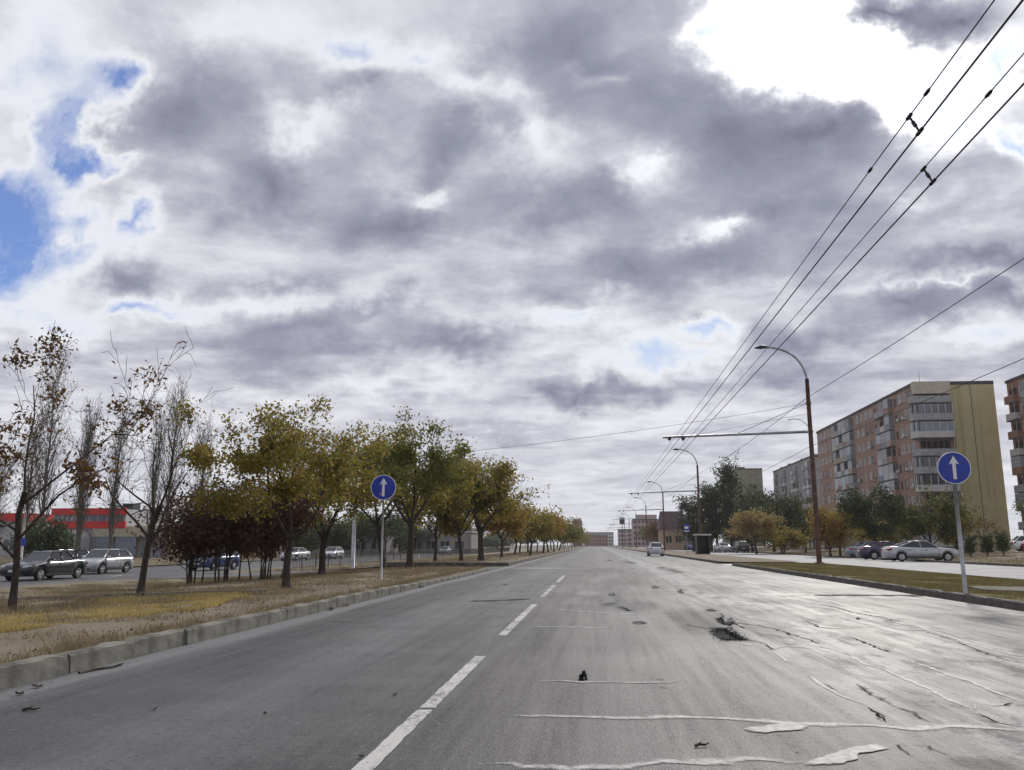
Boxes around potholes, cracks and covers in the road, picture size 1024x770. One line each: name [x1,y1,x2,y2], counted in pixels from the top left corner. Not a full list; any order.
crack [928,632,1021,663]
crack [686,603,897,652]
crack [826,684,930,722]
crack [980,702,1020,727]
pothole [709,627,747,641]
